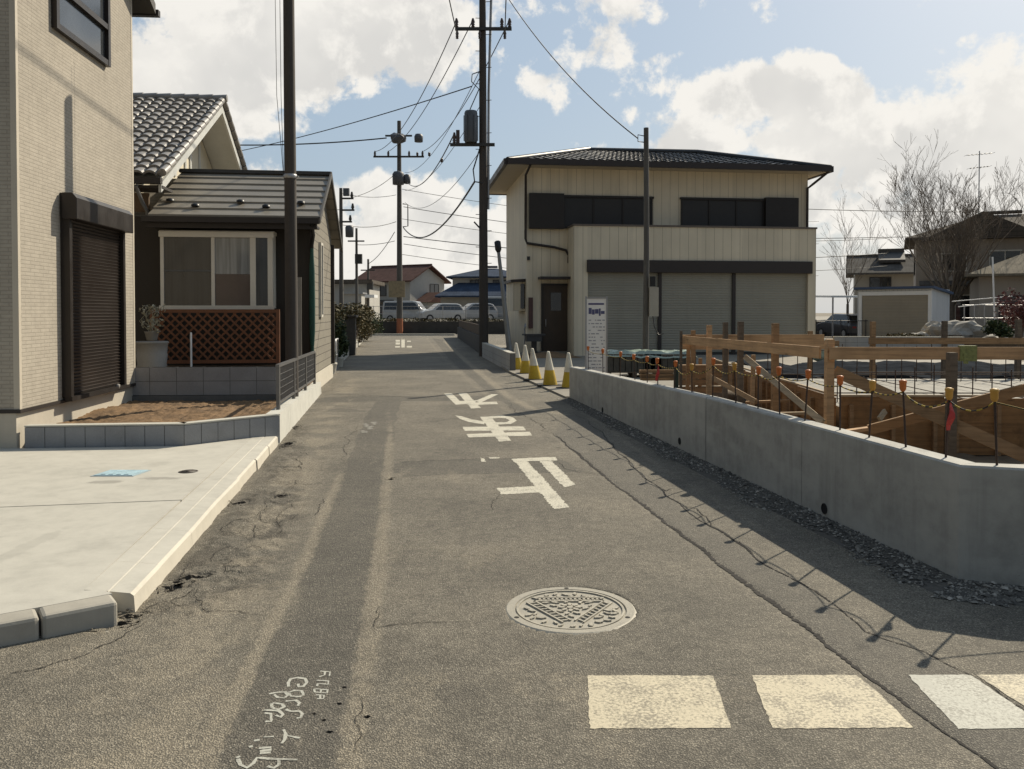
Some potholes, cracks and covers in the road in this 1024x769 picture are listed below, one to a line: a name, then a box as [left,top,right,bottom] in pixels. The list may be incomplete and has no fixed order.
manhole cover [505,587,637,635]
pothole [167,572,218,584]
crack [2,452,324,673]
pothole [156,579,192,594]
pothole [117,609,148,622]
